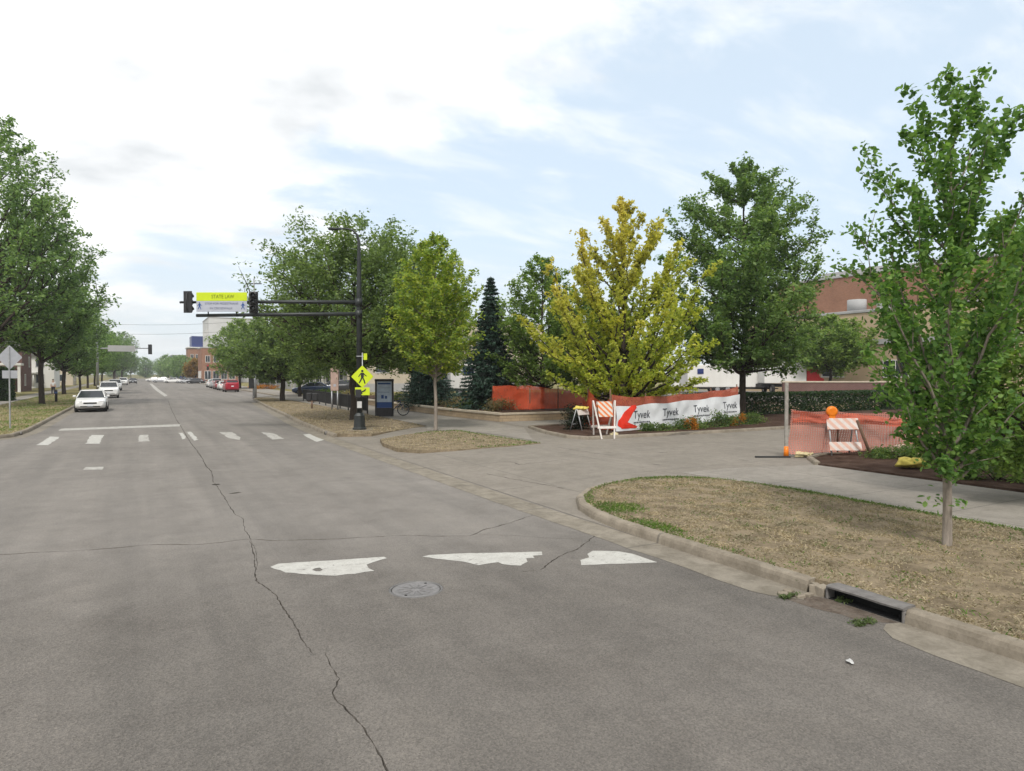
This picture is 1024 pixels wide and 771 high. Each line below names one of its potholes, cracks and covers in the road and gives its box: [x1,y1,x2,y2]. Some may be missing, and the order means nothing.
crack [524,536,595,572]
crack [0,404,569,771]
drain grate [777,582,916,624]
manhole cover [388,581,443,598]
